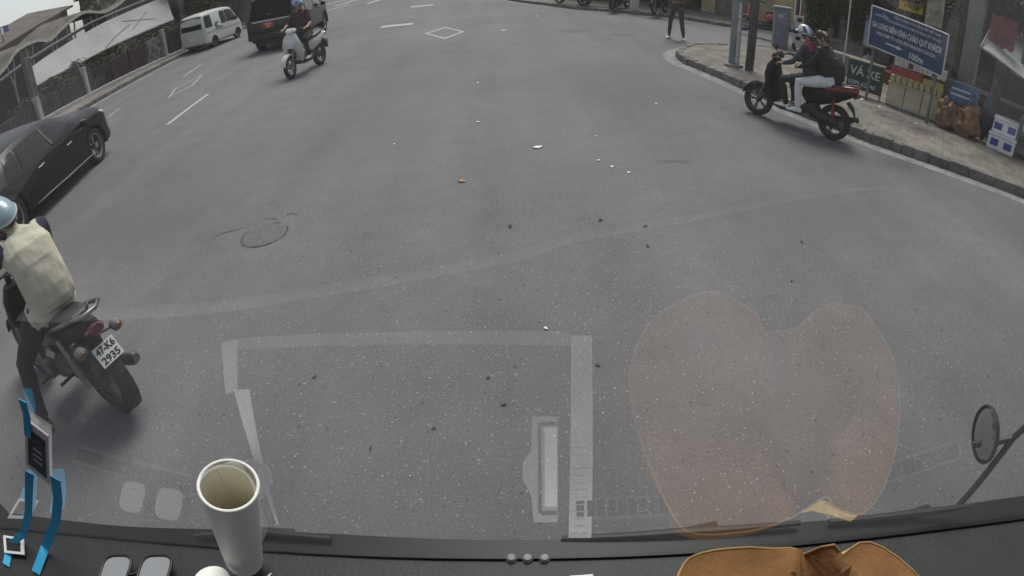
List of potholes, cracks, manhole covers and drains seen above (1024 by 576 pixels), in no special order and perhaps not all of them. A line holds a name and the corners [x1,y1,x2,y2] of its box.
manhole cover [241,222,289,247]
